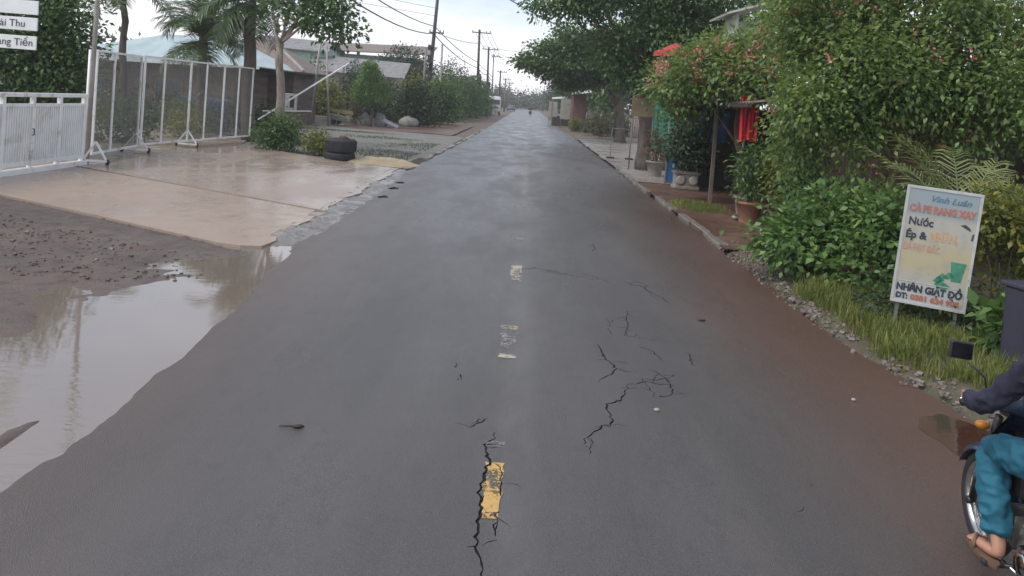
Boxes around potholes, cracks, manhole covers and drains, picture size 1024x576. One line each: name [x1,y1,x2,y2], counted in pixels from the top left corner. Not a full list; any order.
crack [458,418,519,576]
crack [584,310,701,453]
